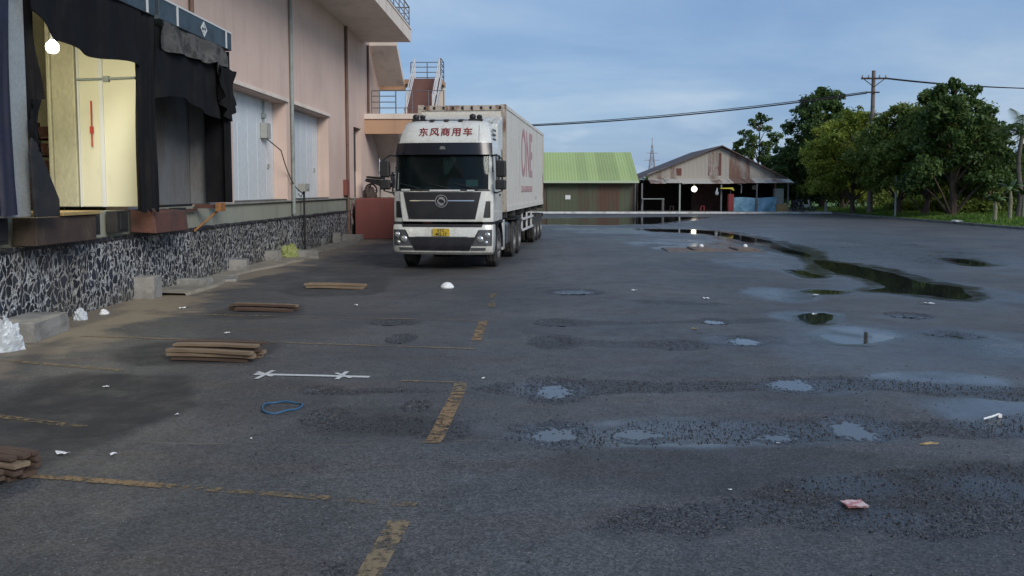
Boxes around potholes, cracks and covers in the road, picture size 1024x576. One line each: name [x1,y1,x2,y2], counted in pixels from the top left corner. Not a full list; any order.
pothole [535,318,585,327]
pothole [763,378,825,394]
pothole [517,422,594,449]
pothole [748,429,809,444]
pothole [821,416,887,442]
pothole [610,430,668,445]
pothole [529,335,584,349]
pothole [386,334,416,344]
pothole [520,378,589,403]
pothole [641,340,707,350]
